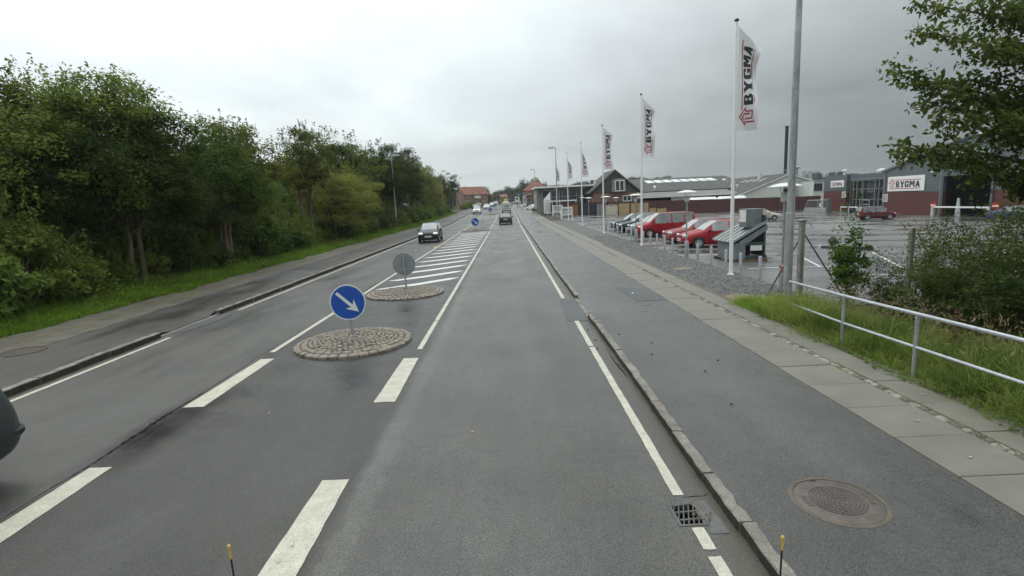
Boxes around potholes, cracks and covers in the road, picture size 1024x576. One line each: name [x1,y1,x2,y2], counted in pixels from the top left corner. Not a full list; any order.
drain grate [667,501,712,526]
manhole cover [0,346,48,359]
manhole cover [788,477,893,528]
